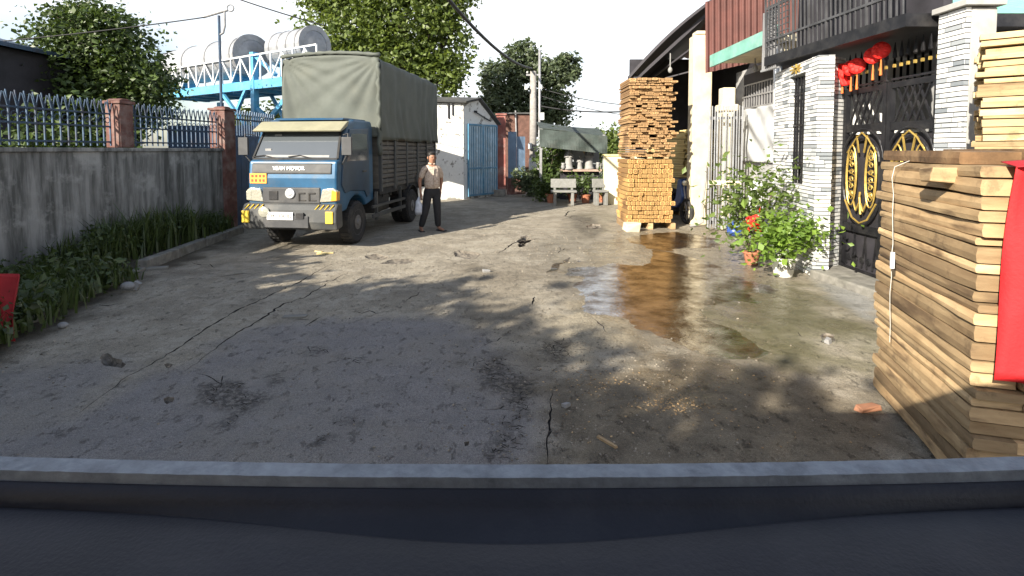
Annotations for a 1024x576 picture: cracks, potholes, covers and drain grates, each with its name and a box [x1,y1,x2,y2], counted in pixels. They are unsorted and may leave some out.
crack [79,261,364,425]
